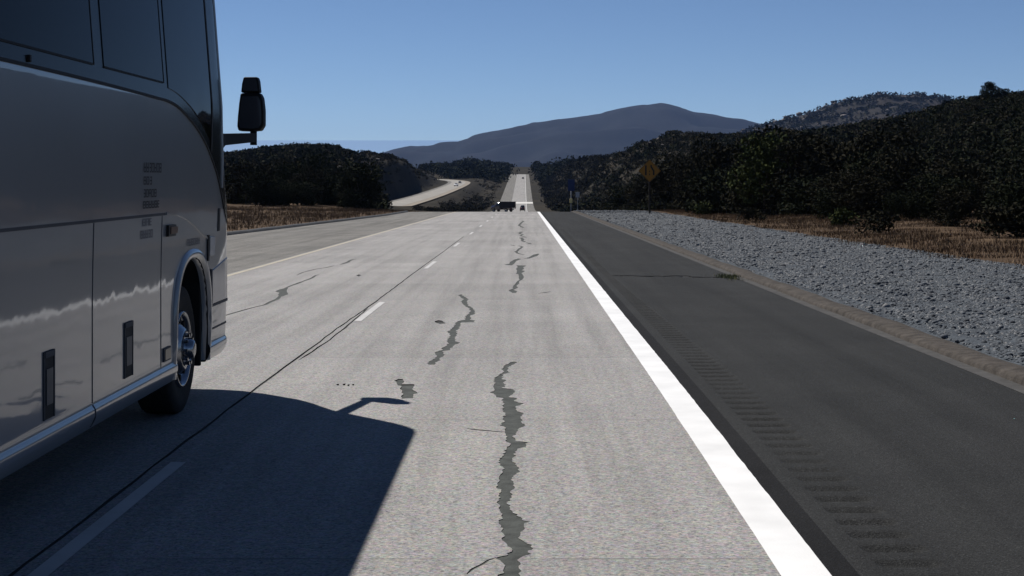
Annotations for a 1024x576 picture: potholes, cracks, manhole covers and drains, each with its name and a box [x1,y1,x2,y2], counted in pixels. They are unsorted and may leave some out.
crack [504,221,539,293]
crack [428,295,533,576]
crack [226,259,355,316]
